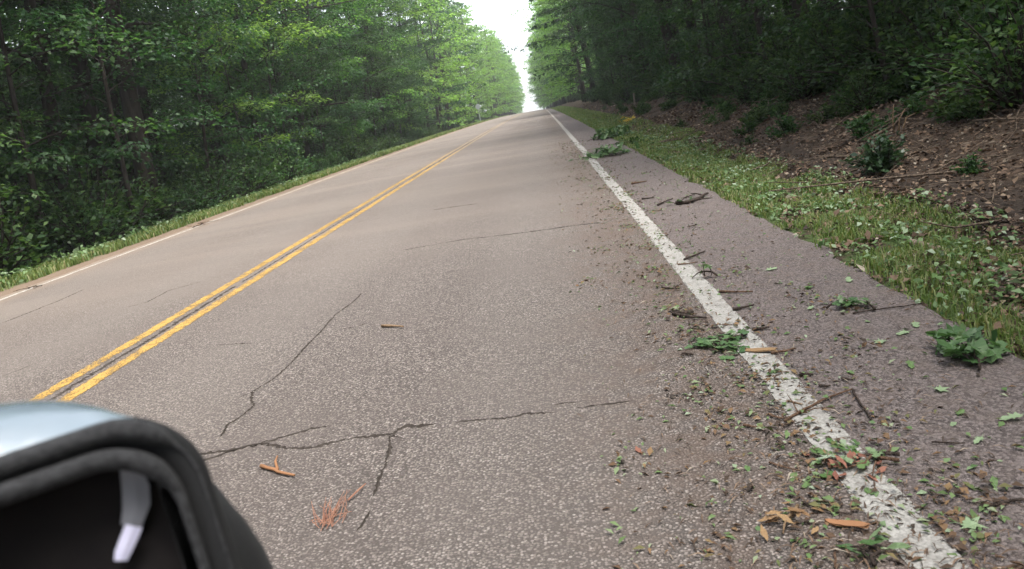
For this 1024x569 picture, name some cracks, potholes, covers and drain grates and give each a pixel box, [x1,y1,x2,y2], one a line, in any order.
crack [405,223,593,250]
crack [201,294,630,531]
